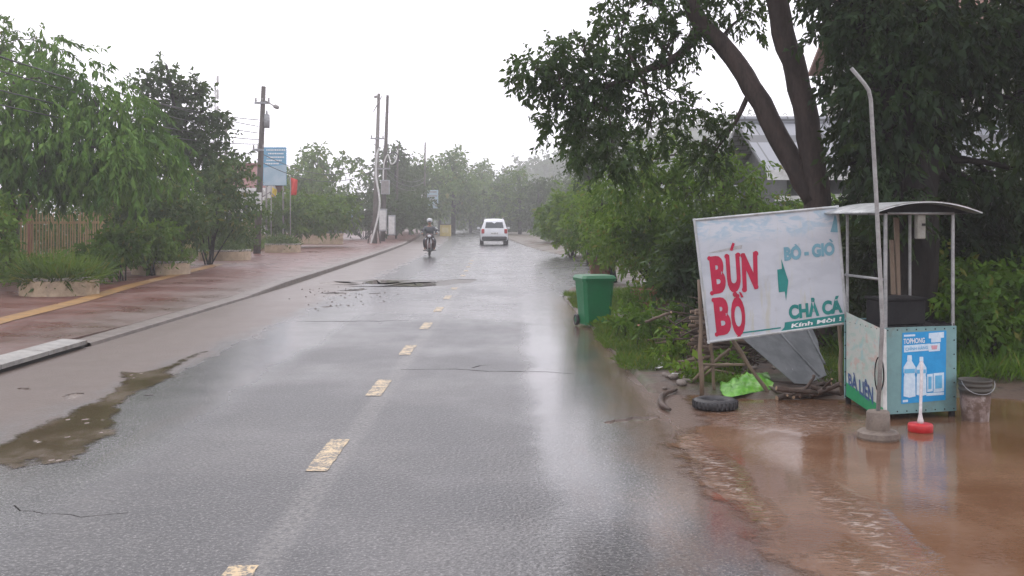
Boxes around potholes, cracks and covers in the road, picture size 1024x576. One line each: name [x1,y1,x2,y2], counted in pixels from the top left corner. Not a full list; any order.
pothole [348,279,477,287]
crack [13,505,123,517]
crack [401,365,570,374]
